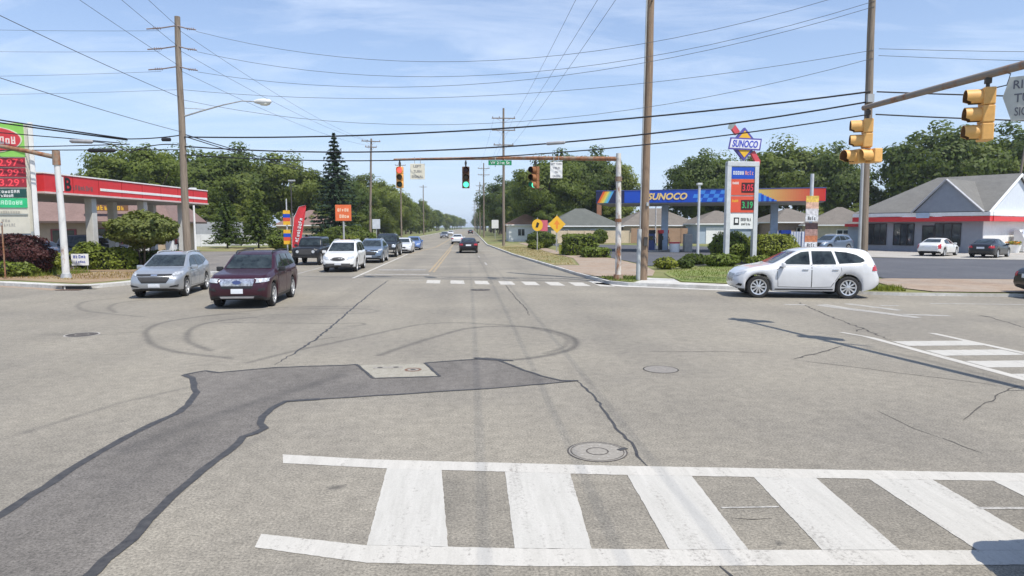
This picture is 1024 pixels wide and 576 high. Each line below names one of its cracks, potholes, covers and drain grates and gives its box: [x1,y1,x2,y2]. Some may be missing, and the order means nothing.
crack [276,280,388,364]
manhole cover [567,442,628,462]
crack [795,303,1022,420]
